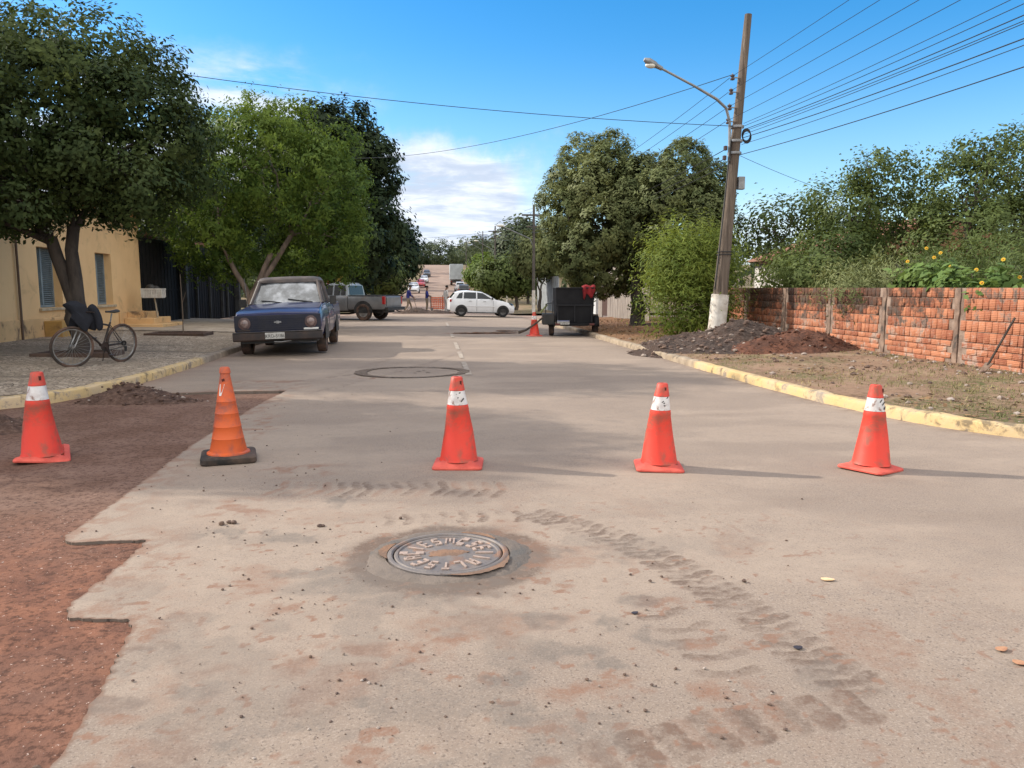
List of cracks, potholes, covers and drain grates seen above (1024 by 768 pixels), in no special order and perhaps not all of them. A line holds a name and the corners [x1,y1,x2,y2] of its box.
manhole cover [365,530,532,585]
